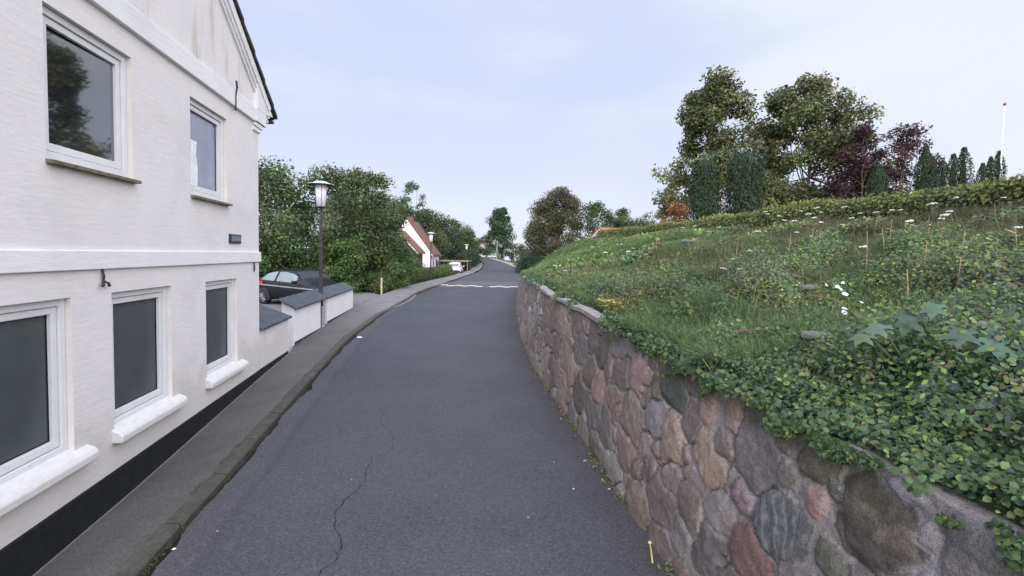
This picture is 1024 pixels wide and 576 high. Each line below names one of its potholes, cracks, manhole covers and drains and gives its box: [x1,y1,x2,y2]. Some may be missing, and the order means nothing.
crack [318,377,419,575]
